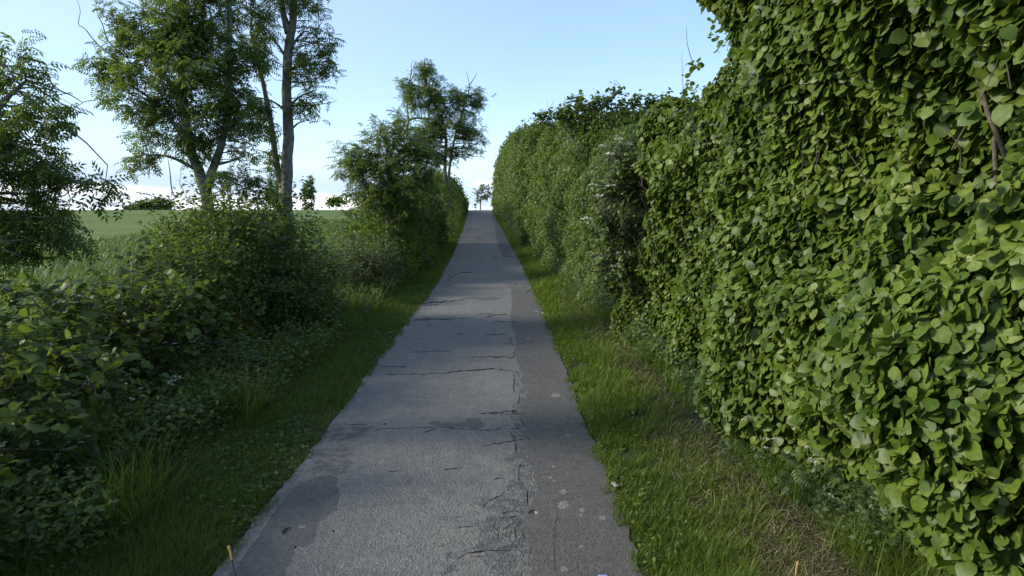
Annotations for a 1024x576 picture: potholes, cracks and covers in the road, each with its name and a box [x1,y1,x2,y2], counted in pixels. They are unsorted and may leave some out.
crack [348,272,533,559]
